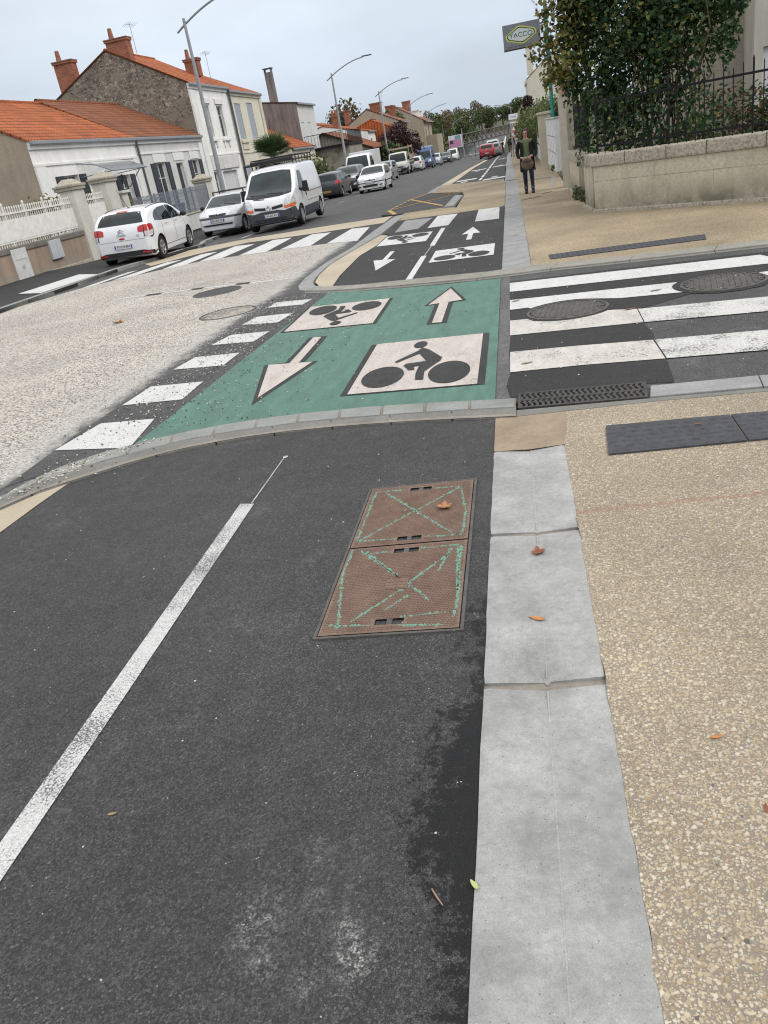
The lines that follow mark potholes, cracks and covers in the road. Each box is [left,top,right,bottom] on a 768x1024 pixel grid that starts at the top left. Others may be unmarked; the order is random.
manhole cover [312,478,477,641]
manhole cover [527,299,609,320]
drain grate [518,381,648,410]
manhole cover [680,272,768,292]
manhole cover [199,305,257,321]
manhole cover [192,286,242,298]
